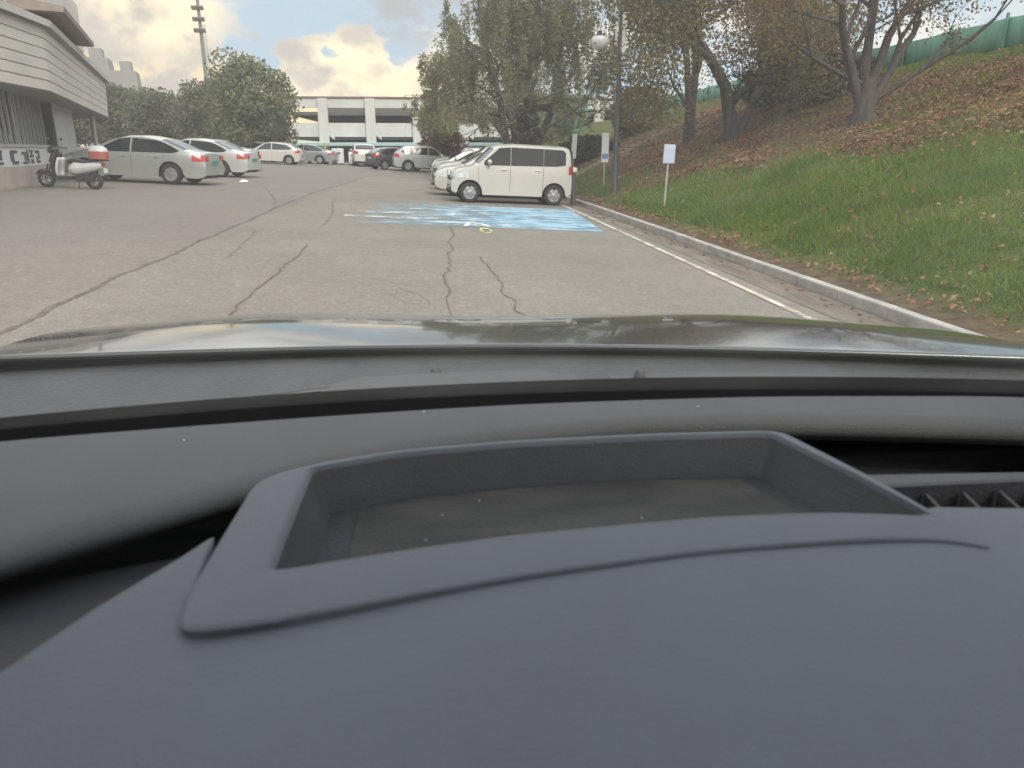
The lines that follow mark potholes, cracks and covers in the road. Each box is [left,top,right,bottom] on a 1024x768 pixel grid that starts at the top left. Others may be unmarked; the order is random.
crack [0,175,376,334]
crack [392,218,455,315]
crack [476,255,526,316]
